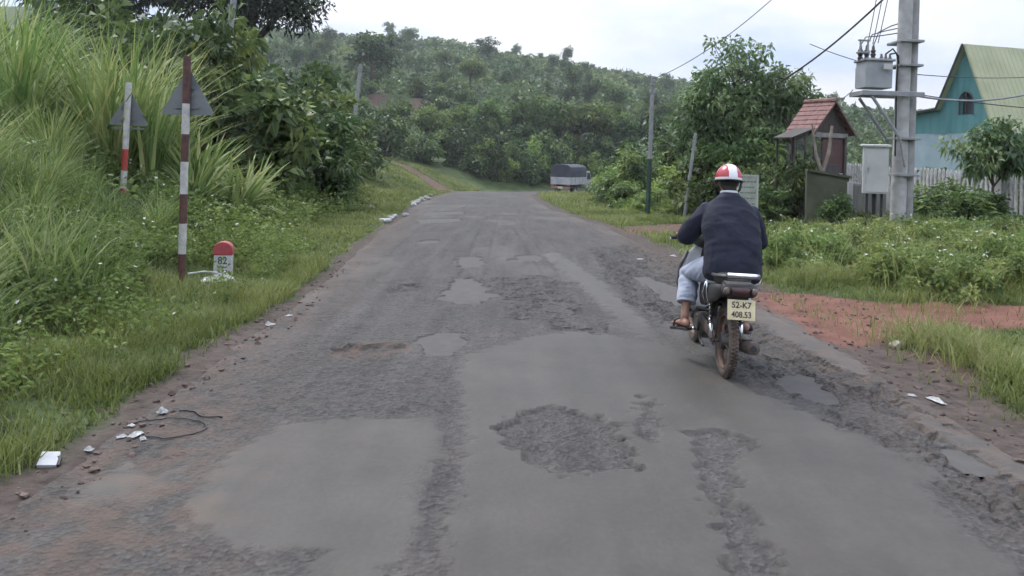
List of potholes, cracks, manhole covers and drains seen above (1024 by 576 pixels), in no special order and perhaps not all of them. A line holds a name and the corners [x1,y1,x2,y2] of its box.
pothole [323,340,412,360]
pothole [770,373,841,406]
pothole [543,281,589,295]
pothole [612,394,675,444]
pothole [489,404,648,482]
pothole [674,427,798,576]
